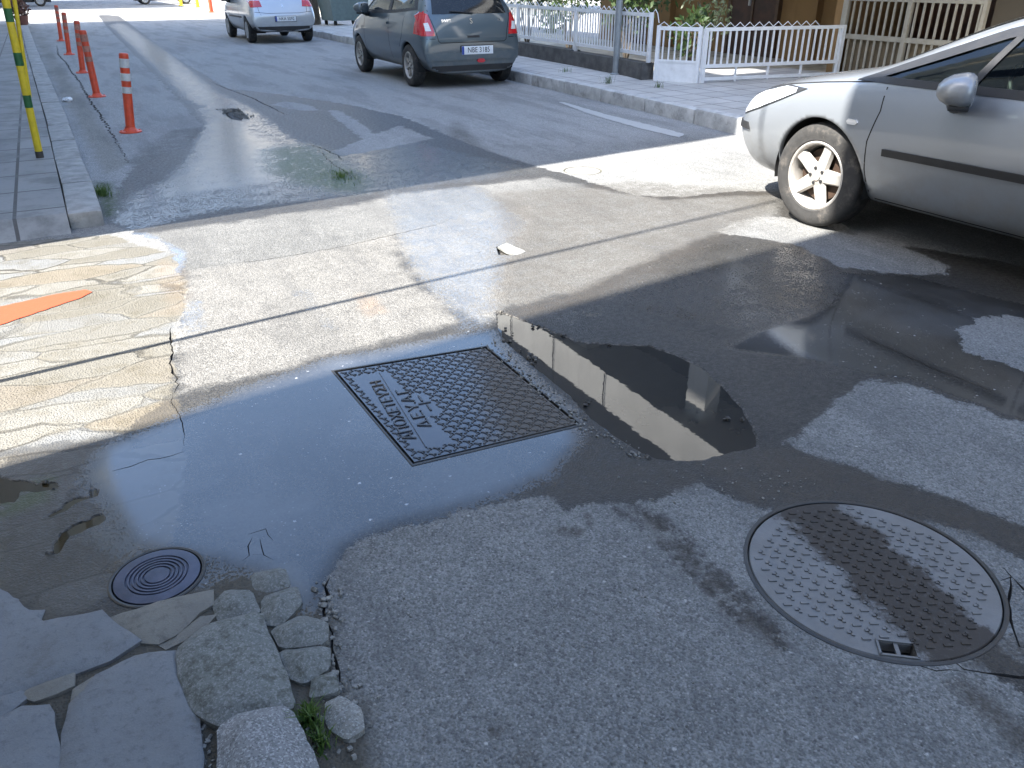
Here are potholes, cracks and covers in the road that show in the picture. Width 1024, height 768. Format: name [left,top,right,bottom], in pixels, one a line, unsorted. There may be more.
crack [921,568,1024,679]
pothole [496,310,759,461]
pothole [46,484,100,518]
pothole [225,108,245,121]
manhole cover [744,500,1010,666]
pothole [0,475,60,504]
crack [57,47,129,163]
manhole cover [331,346,584,466]
crack [114,328,185,471]
crack [245,529,273,560]
pothole [45,513,106,555]
